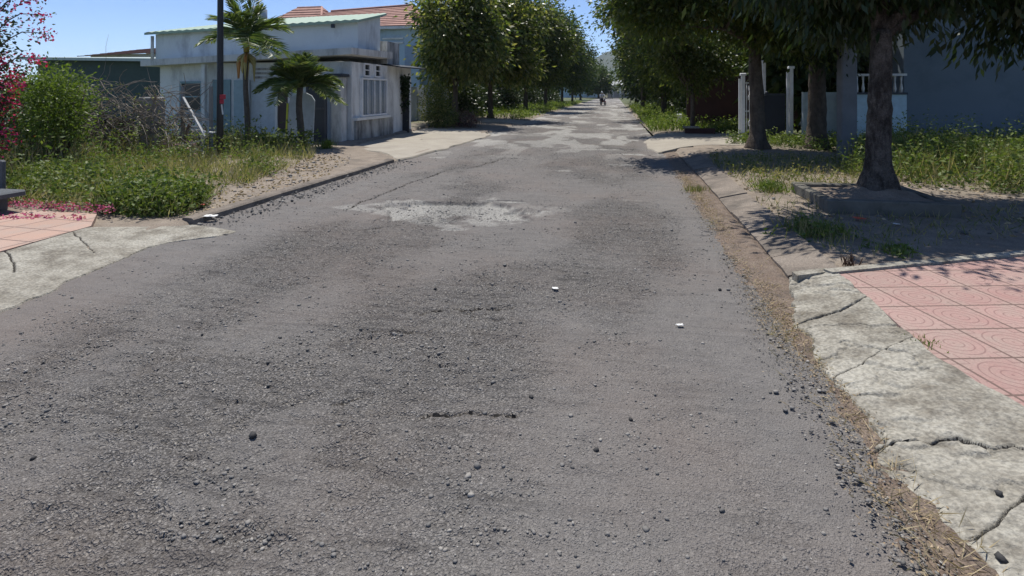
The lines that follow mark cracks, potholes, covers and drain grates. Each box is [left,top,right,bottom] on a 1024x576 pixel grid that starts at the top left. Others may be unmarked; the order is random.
crack [423,411,516,419]
crack [343,159,499,210]
pothole [375,200,542,223]
crack [876,437,1023,454]
